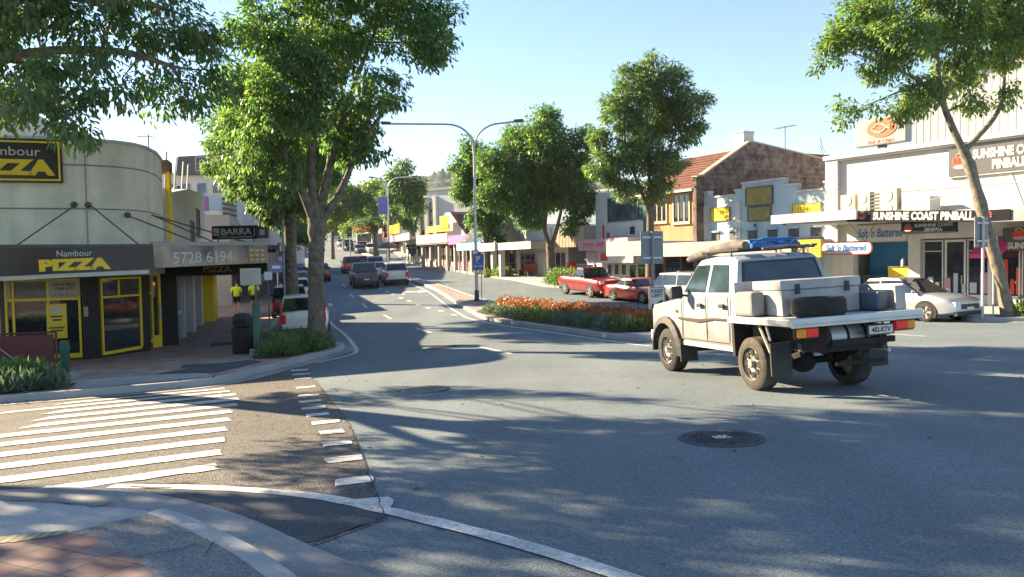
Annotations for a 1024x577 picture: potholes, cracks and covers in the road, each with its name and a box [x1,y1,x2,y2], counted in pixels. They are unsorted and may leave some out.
manhole cover [397,386,449,394]
manhole cover [679,430,766,448]
